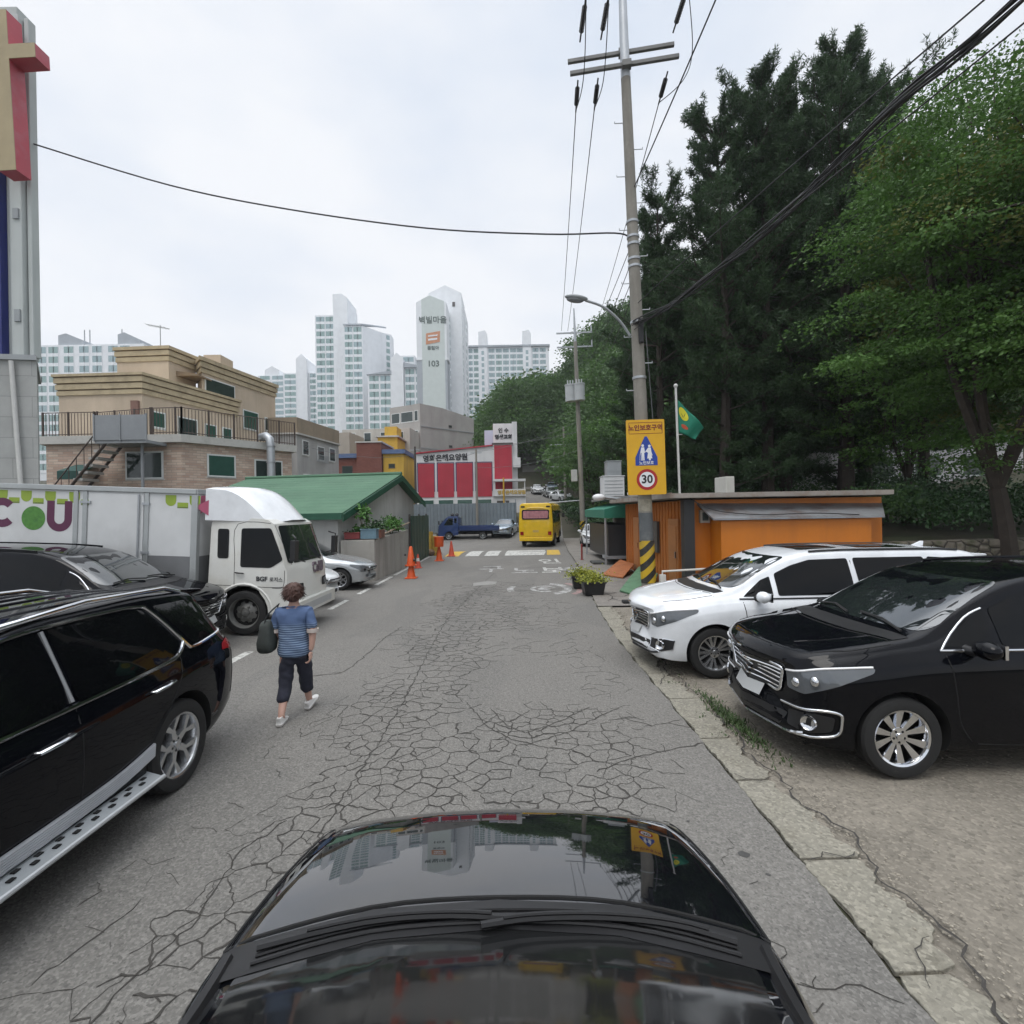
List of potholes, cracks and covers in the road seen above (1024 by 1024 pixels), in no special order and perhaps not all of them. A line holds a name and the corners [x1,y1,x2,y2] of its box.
crack [0,573,824,1024]
